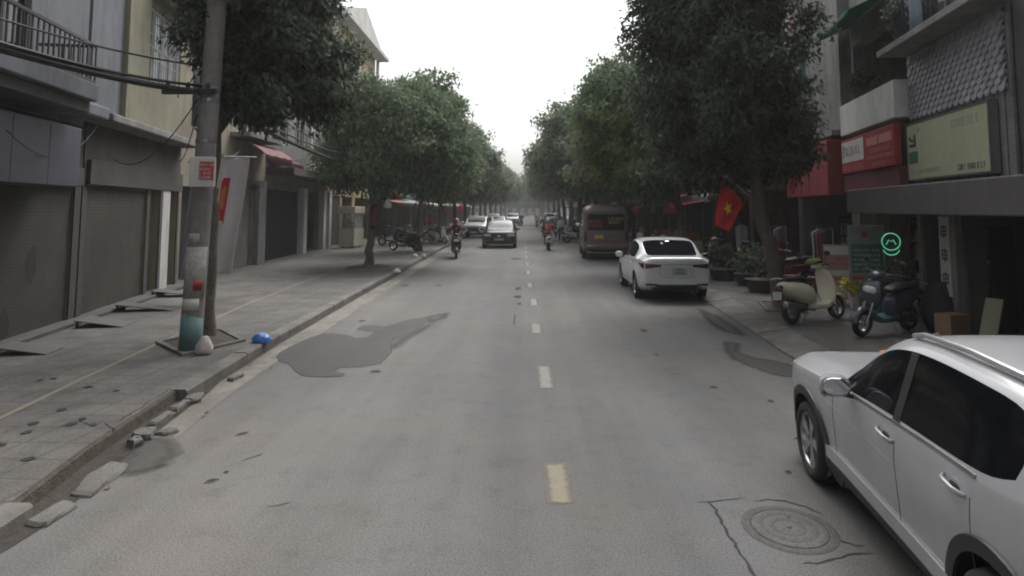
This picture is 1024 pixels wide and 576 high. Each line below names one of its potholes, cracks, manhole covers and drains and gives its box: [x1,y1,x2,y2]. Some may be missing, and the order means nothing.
crack [804,540,866,564]
manhole cover [741,506,841,555]
crack [700,497,822,576]
